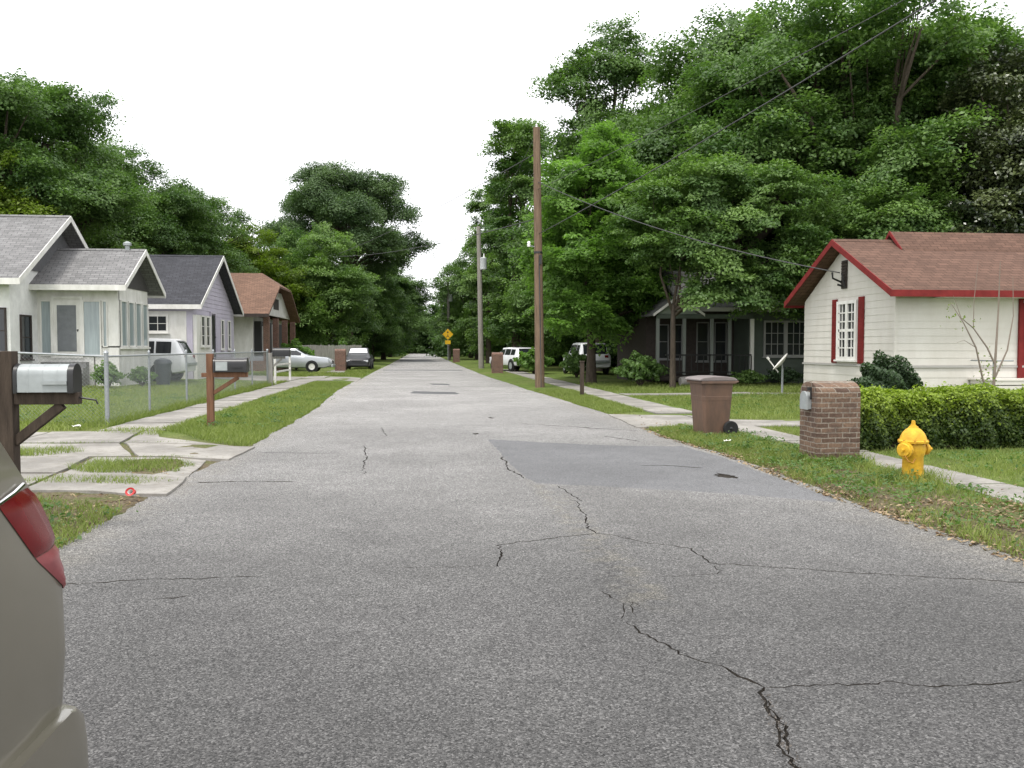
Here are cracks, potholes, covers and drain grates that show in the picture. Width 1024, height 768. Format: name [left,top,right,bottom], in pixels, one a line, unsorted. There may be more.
crack [397,486,1024,583]
crack [601,591,1024,768]
crack [68,576,253,599]
